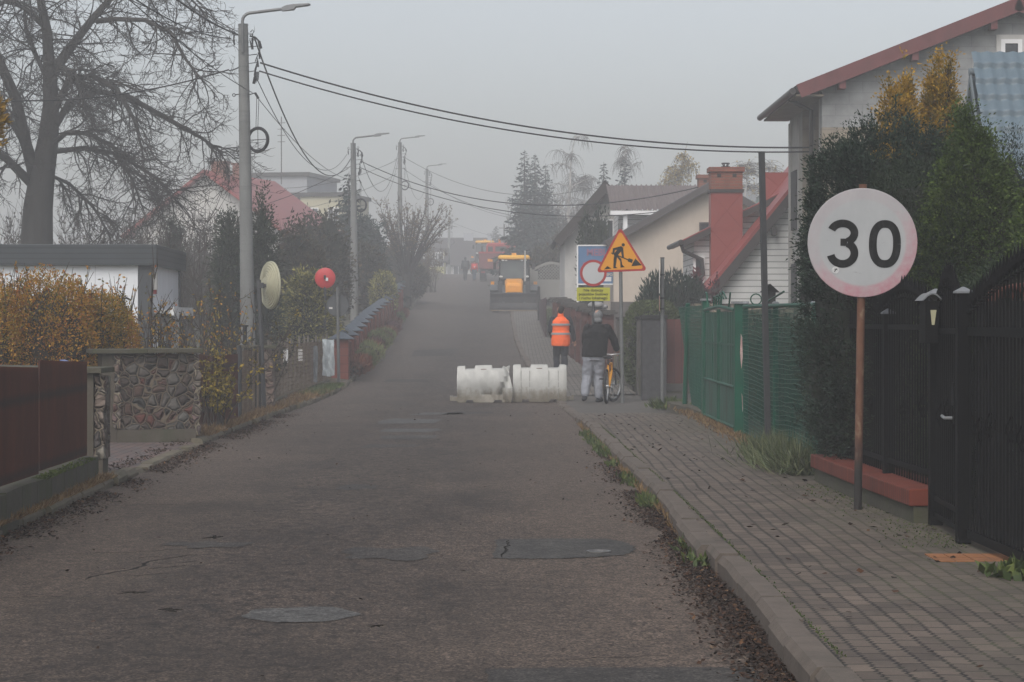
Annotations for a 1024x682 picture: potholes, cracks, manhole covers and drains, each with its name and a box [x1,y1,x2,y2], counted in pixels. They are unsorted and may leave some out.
crack [0,548,197,598]
